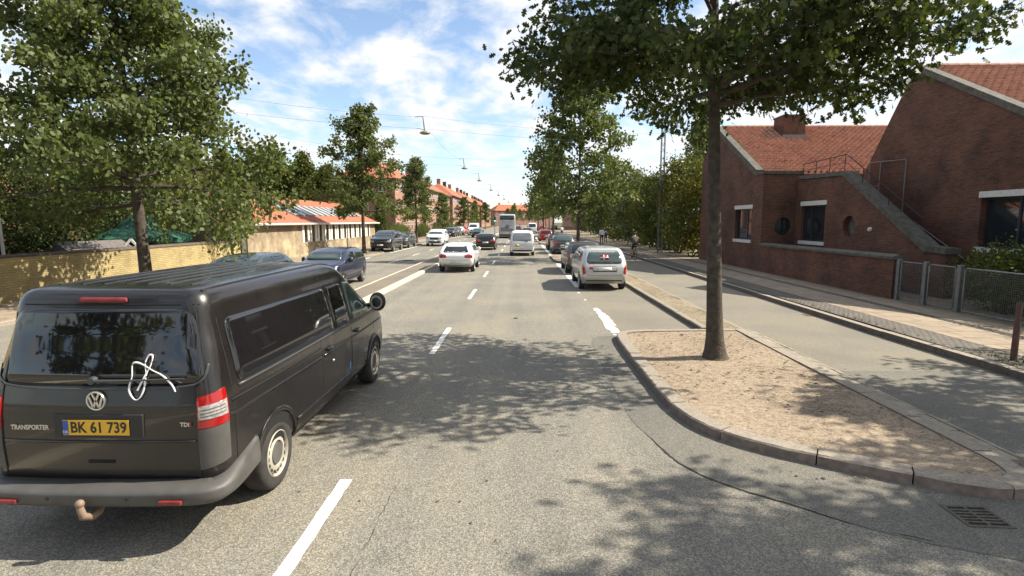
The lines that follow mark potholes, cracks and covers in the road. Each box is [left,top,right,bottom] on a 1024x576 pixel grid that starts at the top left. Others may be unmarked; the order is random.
drain grate [939,504,1017,529]
